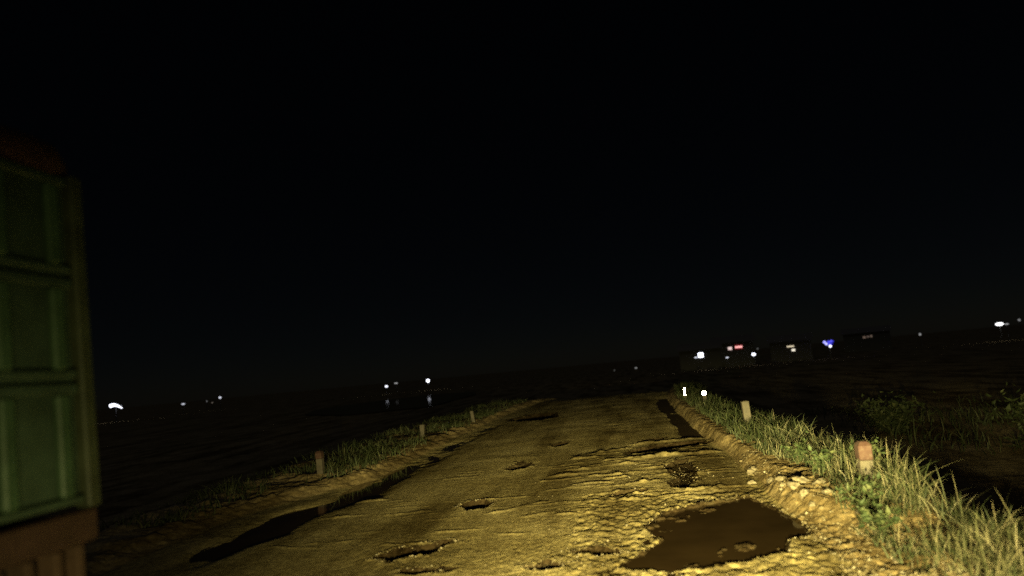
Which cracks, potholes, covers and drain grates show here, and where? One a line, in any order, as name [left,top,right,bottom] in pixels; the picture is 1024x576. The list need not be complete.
pothole [571,545,623,557]
pothole [661,459,702,488]
pothole [459,498,495,511]
pothole [504,461,535,470]
pothole [619,495,815,572]
pothole [520,559,565,571]
pothole [372,539,454,563]
pothole [506,412,559,422]
